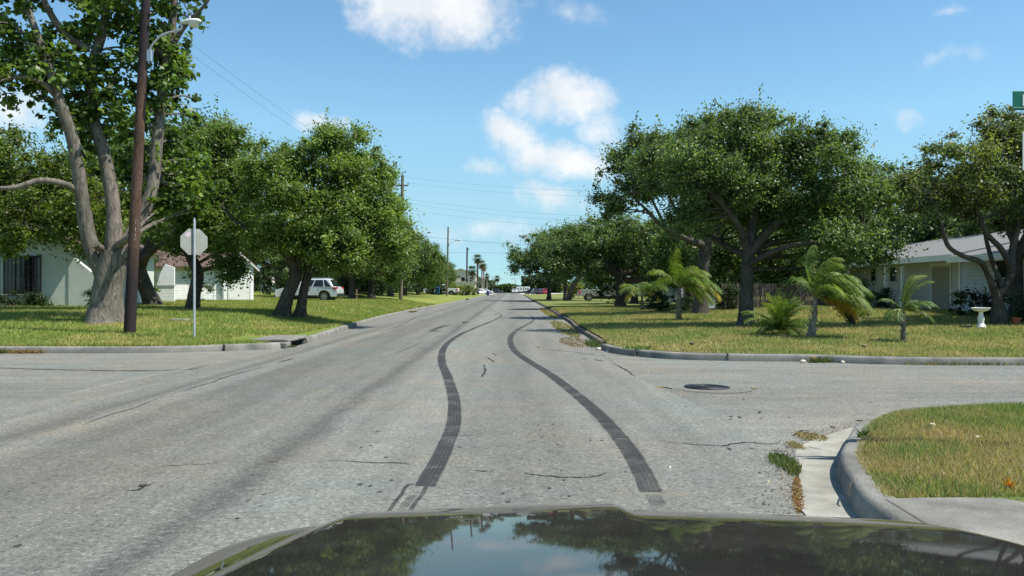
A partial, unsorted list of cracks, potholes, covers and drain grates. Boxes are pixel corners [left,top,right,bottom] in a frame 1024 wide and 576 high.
drain grate [251,335,307,349]
crack [663,430,819,452]
